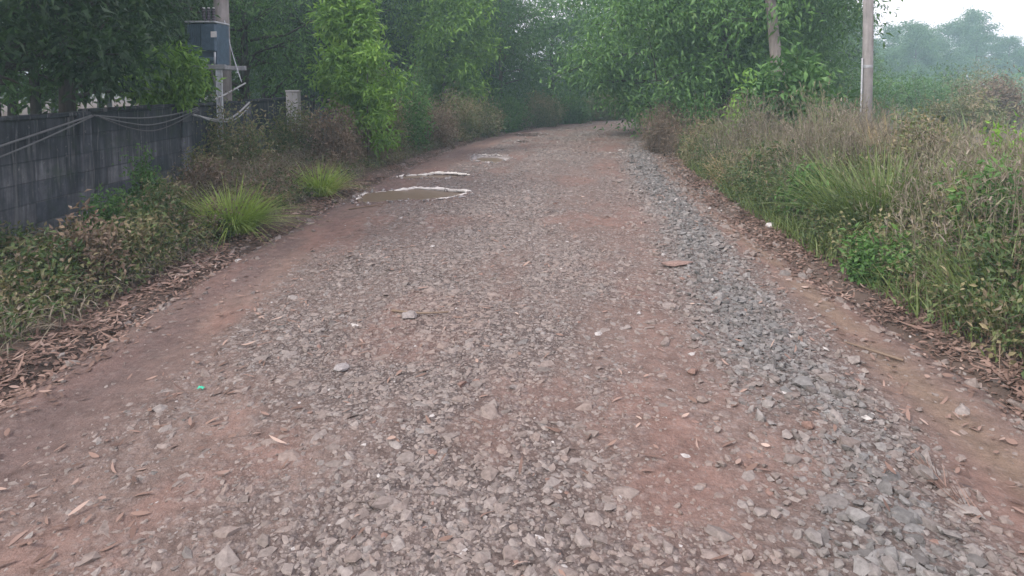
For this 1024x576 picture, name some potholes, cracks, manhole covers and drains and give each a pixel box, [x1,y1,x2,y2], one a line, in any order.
pothole [468,154,515,164]
pothole [389,171,477,179]
pothole [346,186,479,205]
